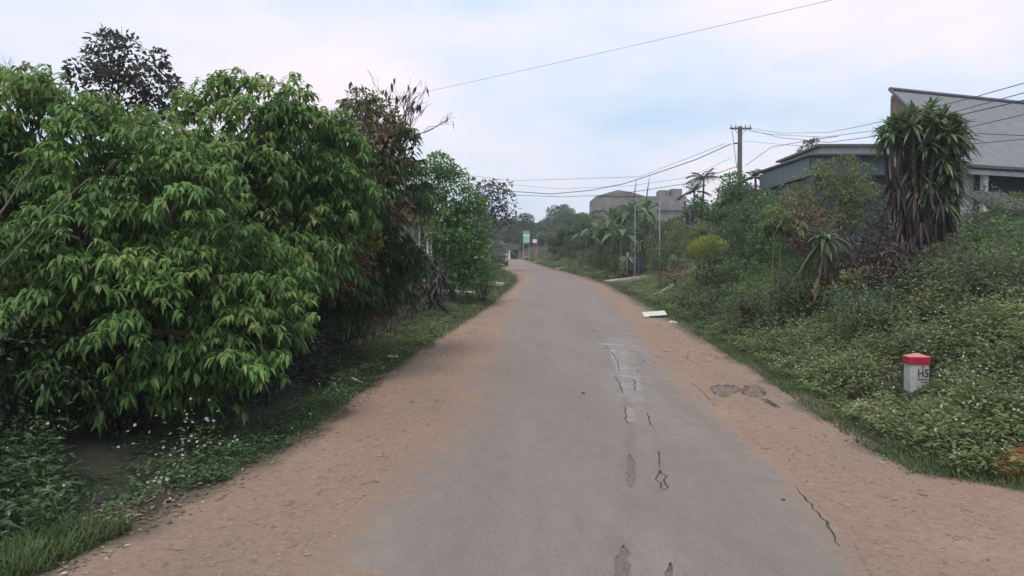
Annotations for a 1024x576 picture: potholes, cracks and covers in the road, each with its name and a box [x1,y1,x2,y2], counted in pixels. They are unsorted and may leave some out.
crack [655,452,669,491]
crack [579,321,668,426]
crack [796,487,840,547]
